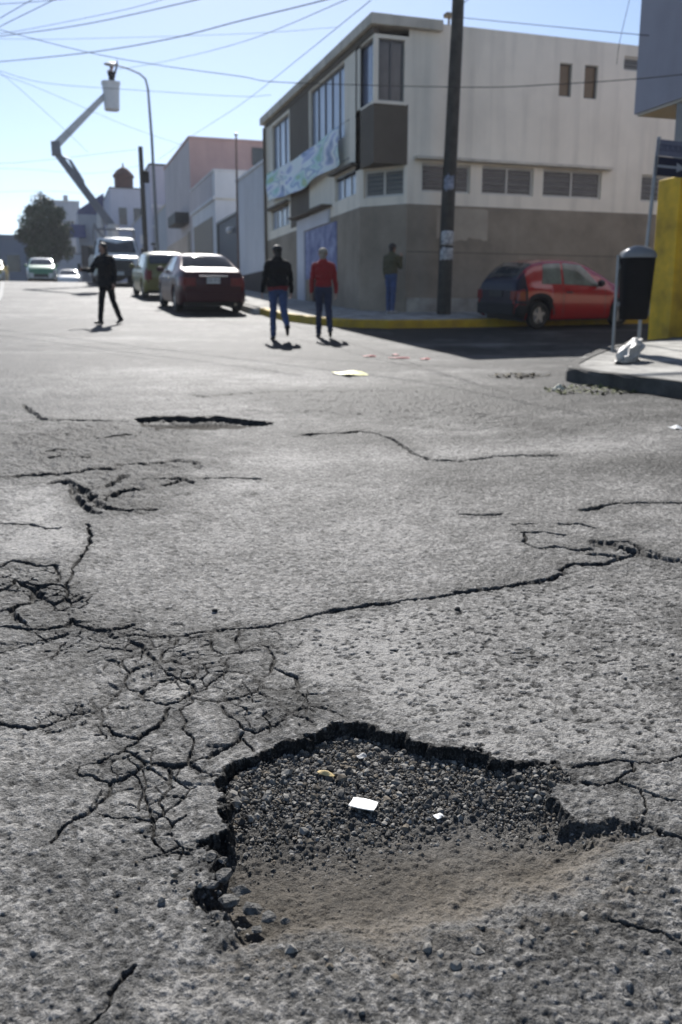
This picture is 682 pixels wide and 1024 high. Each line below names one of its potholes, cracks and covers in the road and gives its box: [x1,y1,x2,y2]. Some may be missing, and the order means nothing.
pothole [132,414,277,431]
crack [0,448,682,861]
crack [300,431,559,462]
pothole [188,720,662,964]
crack [22,404,130,439]
